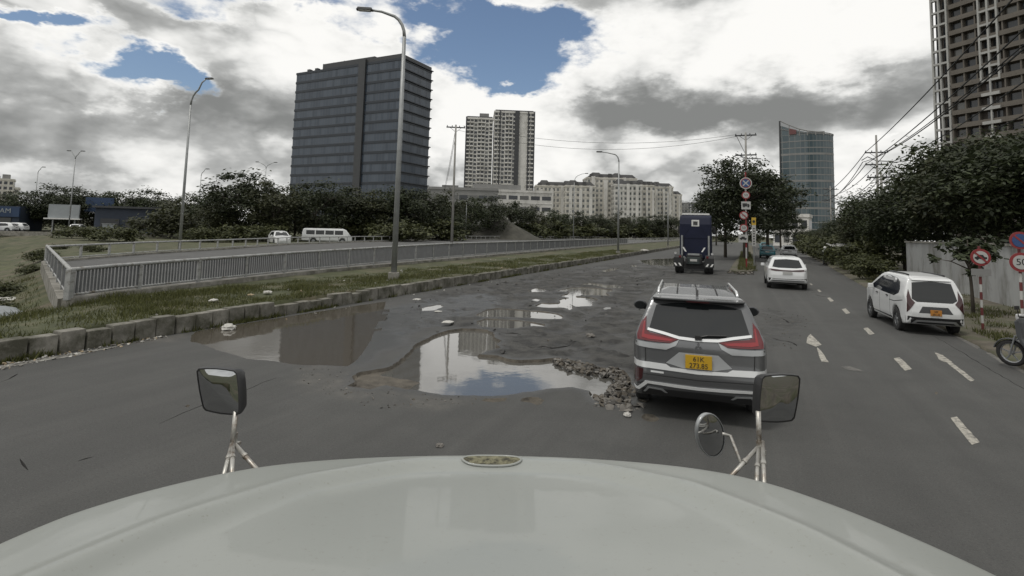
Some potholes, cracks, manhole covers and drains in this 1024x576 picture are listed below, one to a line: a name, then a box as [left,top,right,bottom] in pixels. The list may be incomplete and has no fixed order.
pothole [640,258,674,266]
pothole [348,328,632,402]
pothole [535,287,613,310]
pothole [476,308,563,319]
pothole [477,318,545,329]
